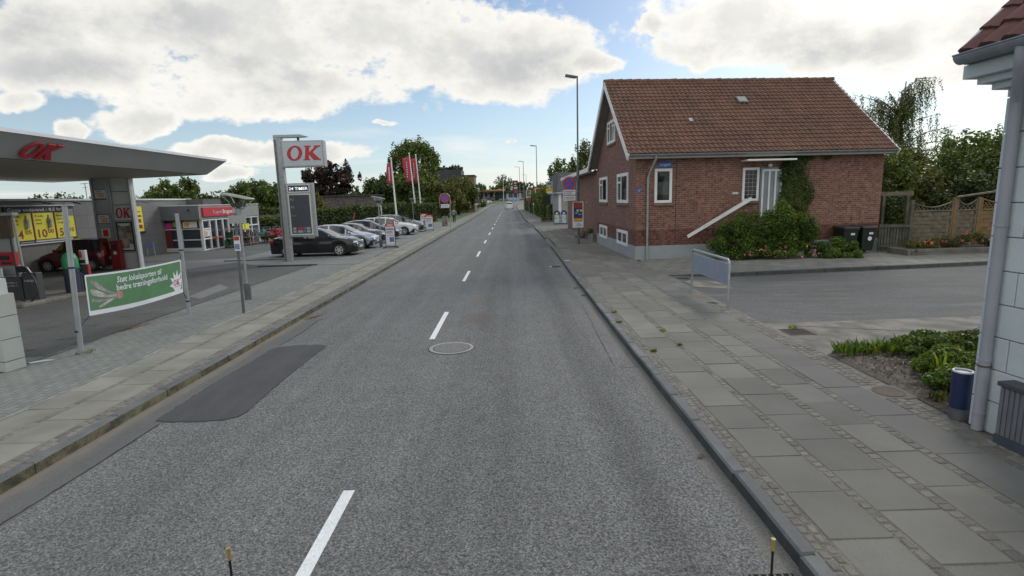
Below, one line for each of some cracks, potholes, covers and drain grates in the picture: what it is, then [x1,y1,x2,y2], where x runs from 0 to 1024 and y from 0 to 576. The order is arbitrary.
manhole cover [428,342,475,355]
utility cover [859,385,920,400]
